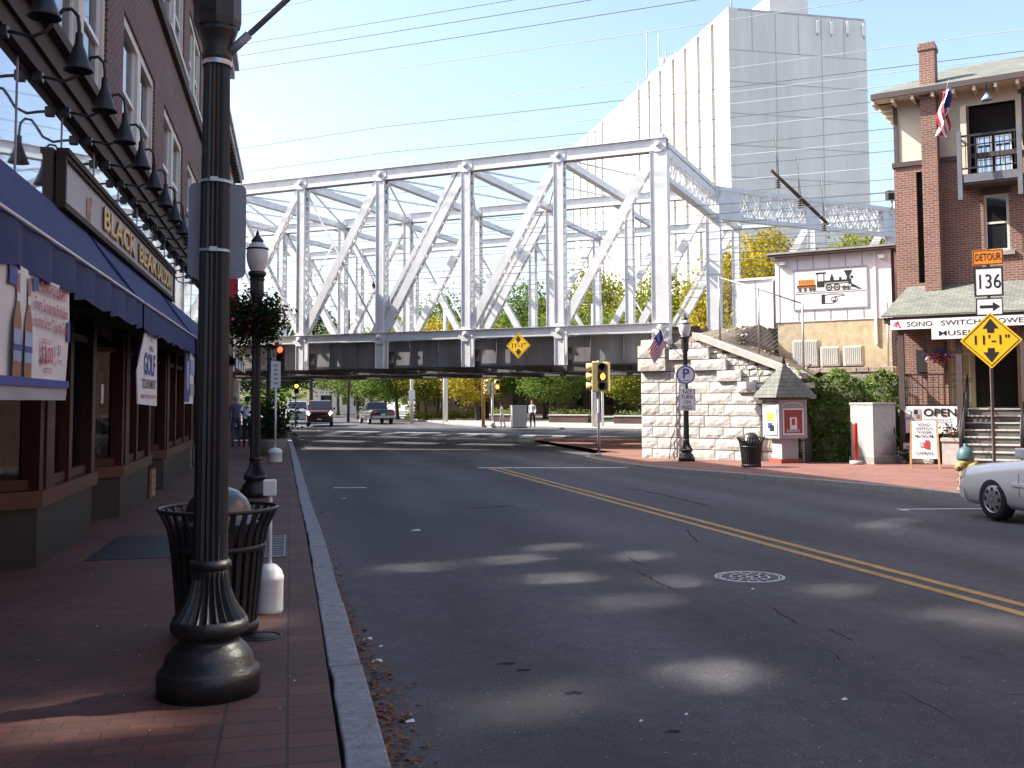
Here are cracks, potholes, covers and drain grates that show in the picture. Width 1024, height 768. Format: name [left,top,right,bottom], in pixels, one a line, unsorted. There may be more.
crack [769,607,852,661]
manhole cover [714,571,785,582]
drain grate [264,535,286,558]
crack [906,645,1000,721]
